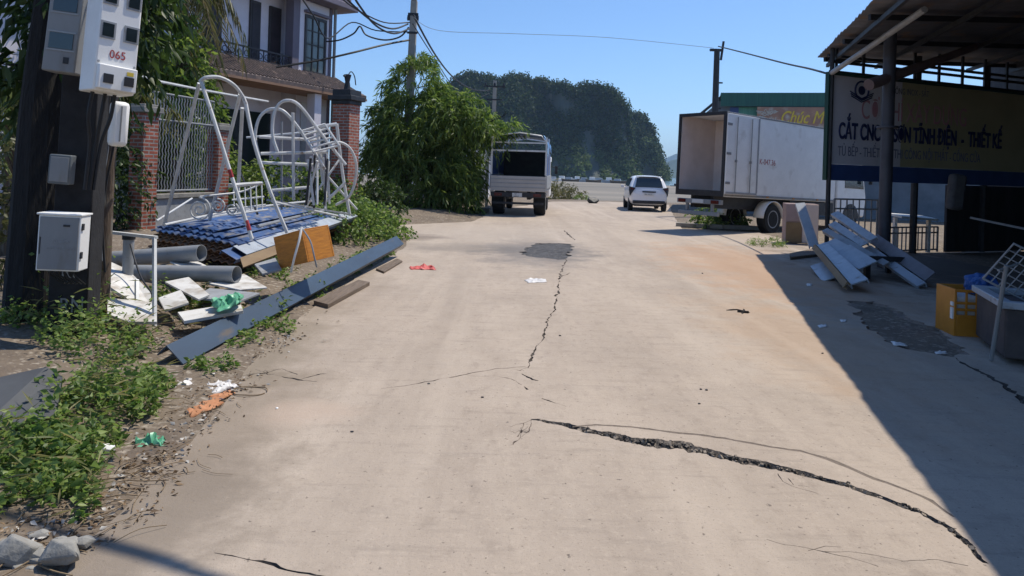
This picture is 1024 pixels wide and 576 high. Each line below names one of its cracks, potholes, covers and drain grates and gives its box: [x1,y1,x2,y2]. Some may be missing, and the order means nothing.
crack [383,260,987,566]
crack [243,370,320,382]
crack [956,358,1024,404]
crack [216,553,321,576]
